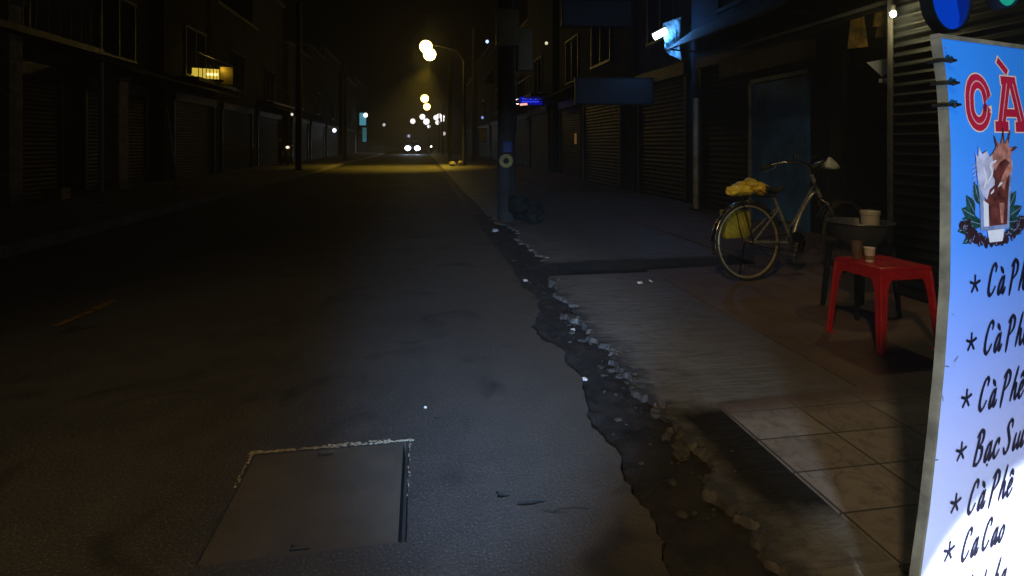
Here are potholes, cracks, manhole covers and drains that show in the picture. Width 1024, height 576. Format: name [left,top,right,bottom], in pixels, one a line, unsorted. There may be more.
manhole cover [195,438,414,566]
